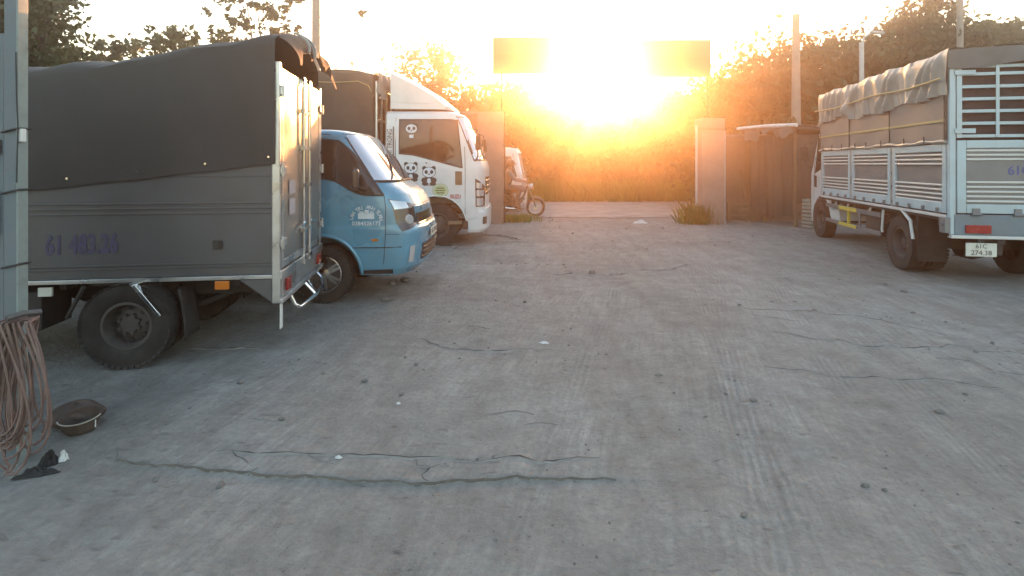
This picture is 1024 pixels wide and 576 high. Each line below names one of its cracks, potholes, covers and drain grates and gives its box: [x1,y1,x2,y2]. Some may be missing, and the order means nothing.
crack [552,264,692,278]
crack [116,450,616,486]
crack [420,326,552,353]
crack [744,308,1024,389]
crack [480,410,557,425]
